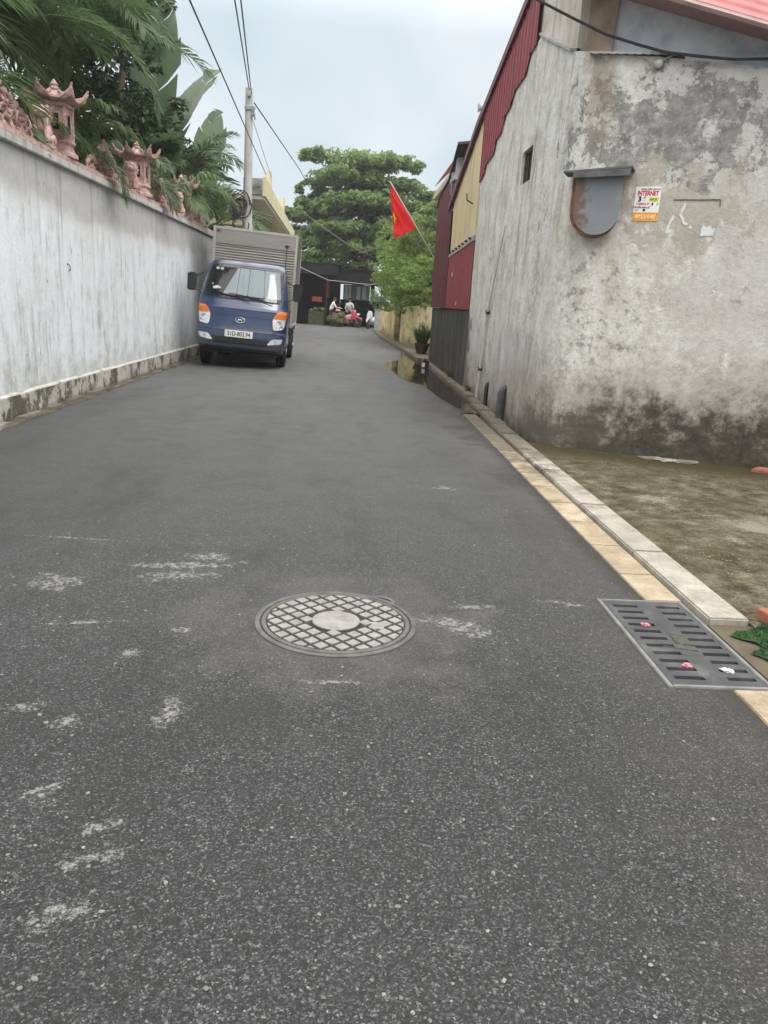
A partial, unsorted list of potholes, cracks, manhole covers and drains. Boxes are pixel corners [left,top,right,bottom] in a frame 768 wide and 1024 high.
manhole cover [255,591,416,658]
drain grate [596,598,768,692]
